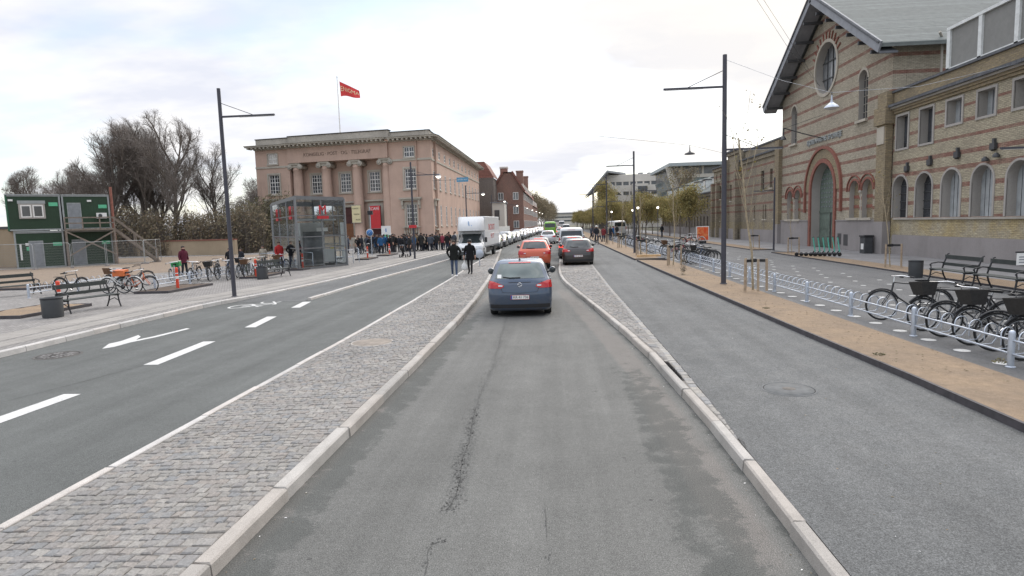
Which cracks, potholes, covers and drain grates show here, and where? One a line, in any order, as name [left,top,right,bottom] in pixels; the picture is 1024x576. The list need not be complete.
crack [441,315,509,512]
manhole cover [761,382,818,397]
manhole cover [350,338,393,347]
manhole cover [31,351,84,360]
crack [421,537,446,576]
